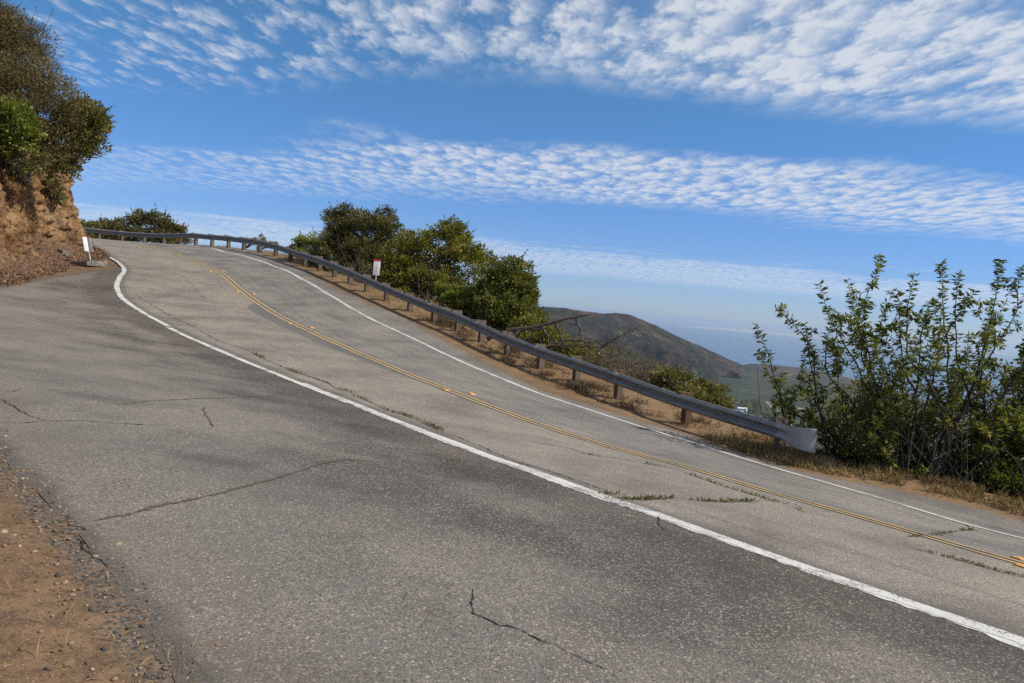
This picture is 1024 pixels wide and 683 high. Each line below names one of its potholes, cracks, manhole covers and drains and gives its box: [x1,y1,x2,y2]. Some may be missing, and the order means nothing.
crack [74,459,372,568]
crack [470,587,628,682]
crack [0,389,167,426]
